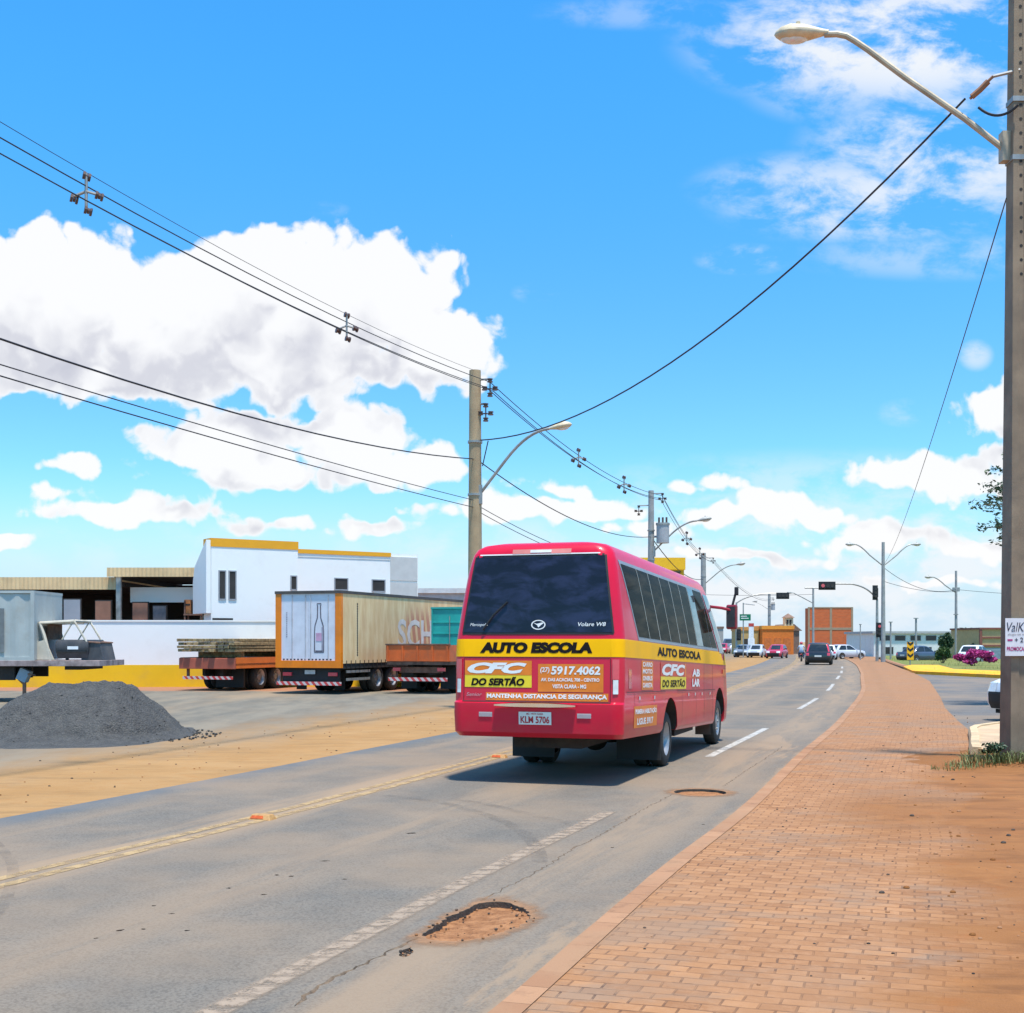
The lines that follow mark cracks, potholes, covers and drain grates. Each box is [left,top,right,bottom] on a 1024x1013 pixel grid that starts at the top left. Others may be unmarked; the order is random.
crack [480,795,671,901]
manhole cover [669,788,735,796]
pothole [408,899,541,945]
crack [295,938,417,1006]
